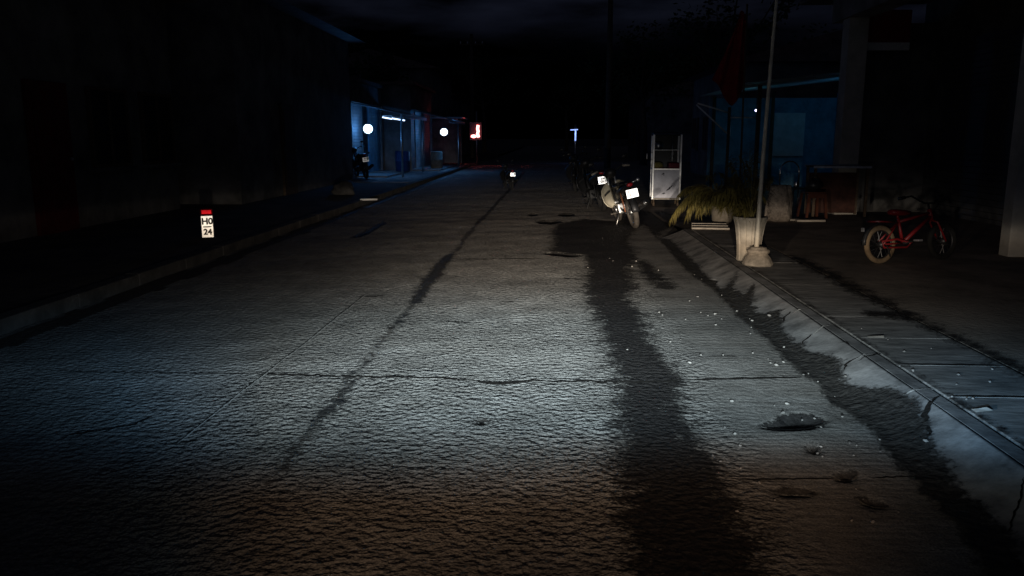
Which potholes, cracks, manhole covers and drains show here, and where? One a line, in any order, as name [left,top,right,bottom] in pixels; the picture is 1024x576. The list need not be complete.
pothole [832,470,857,482]
pothole [854,496,889,509]
pothole [758,413,829,430]
pothole [770,486,816,496]
